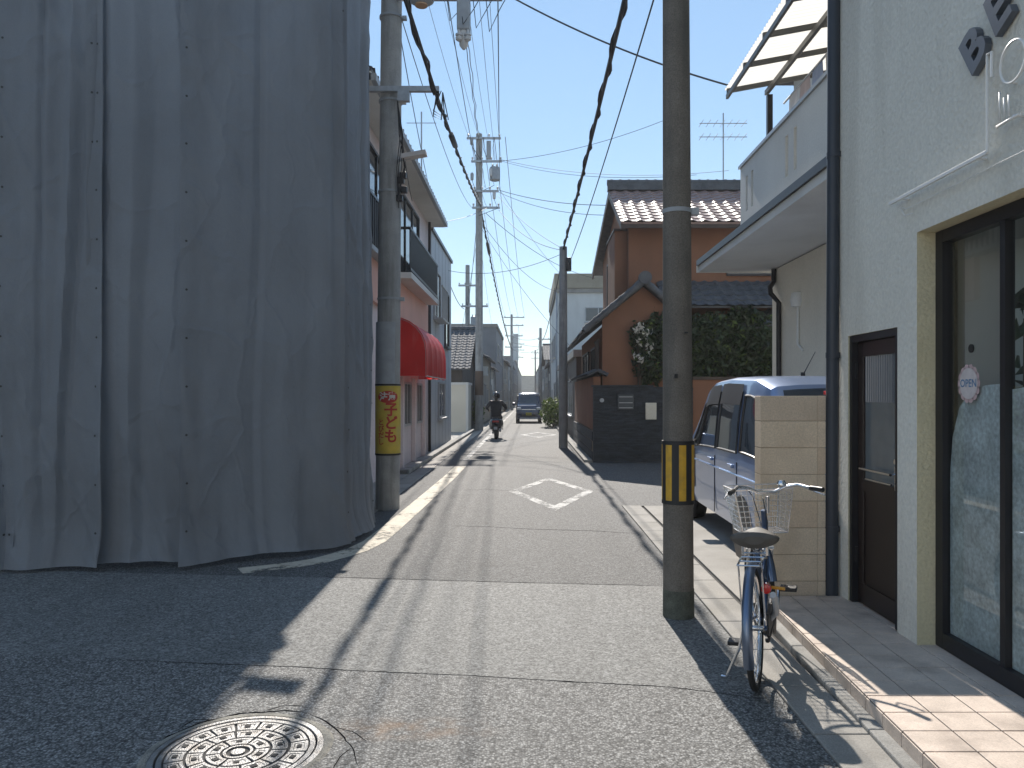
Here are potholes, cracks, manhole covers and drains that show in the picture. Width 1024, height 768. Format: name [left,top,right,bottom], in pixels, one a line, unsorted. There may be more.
manhole cover [136,713,334,768]
crack [164,705,365,768]
